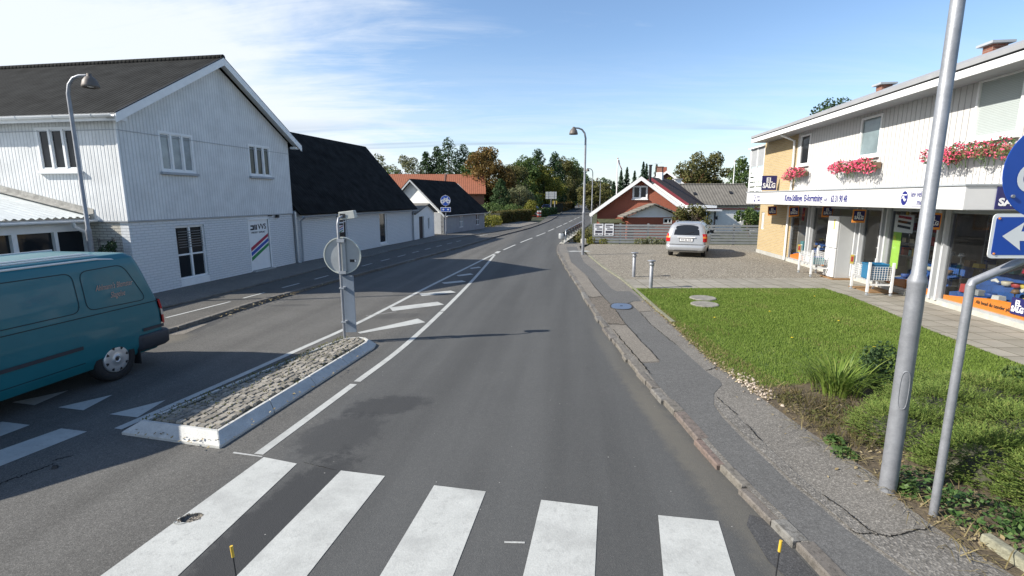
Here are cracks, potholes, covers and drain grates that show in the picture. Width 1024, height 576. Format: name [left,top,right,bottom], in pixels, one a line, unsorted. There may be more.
pothole [173,513,203,524]
crack [824,495,930,537]
